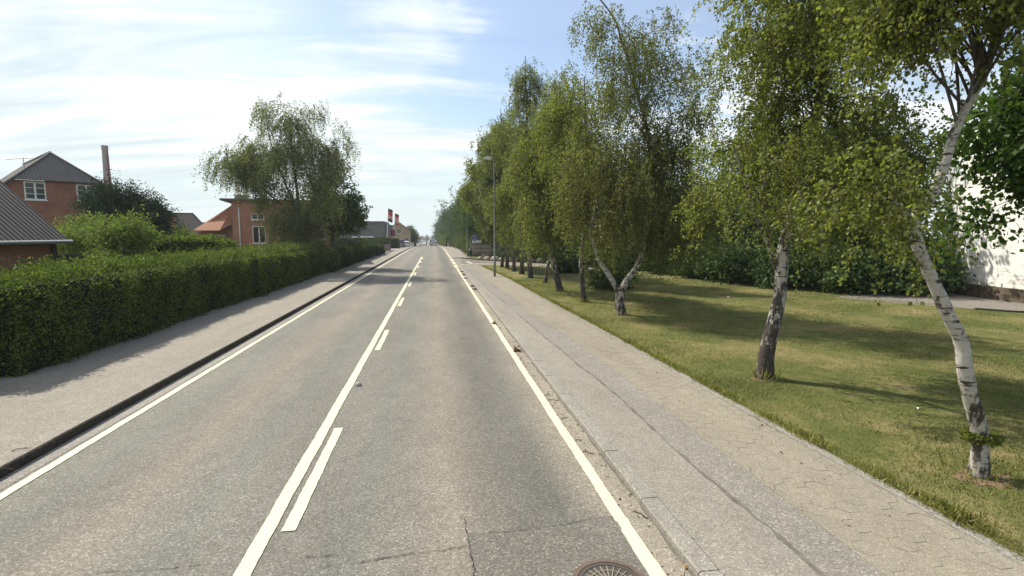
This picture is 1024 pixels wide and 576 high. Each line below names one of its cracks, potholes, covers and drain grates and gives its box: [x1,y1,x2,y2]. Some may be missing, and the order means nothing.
manhole cover [573,559,645,576]
crack [301,519,476,576]
